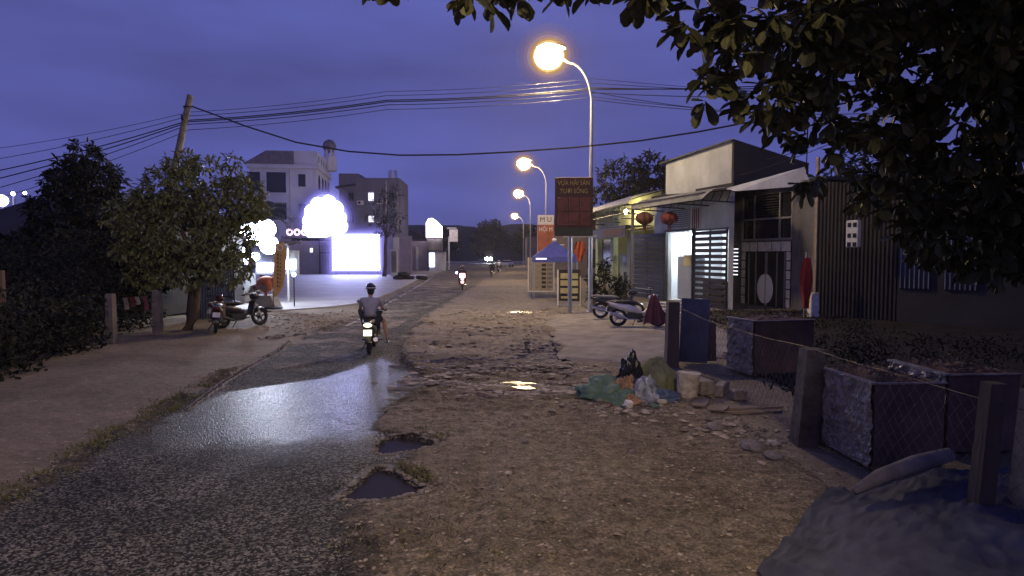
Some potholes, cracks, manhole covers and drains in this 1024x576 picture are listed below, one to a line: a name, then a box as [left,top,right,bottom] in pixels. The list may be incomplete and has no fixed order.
pothole [333,464,433,503]
pothole [370,431,440,456]
